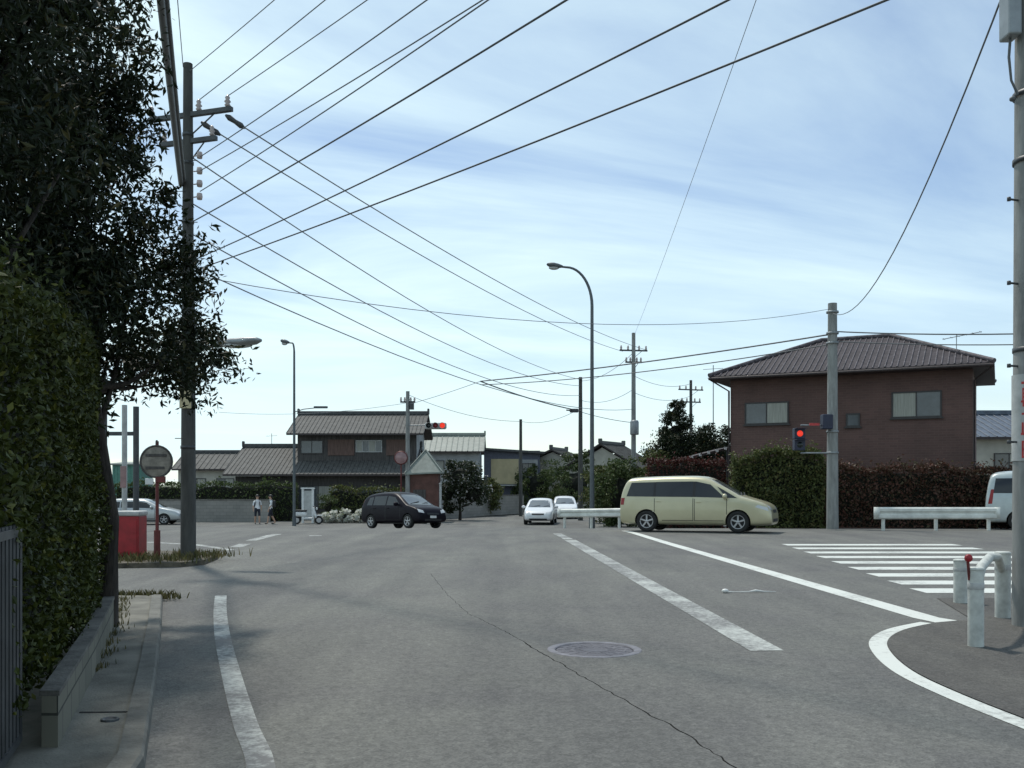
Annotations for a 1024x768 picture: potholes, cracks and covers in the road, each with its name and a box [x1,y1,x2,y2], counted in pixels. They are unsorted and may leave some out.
crack [431,574,737,768]
manhole cover [547,641,642,658]
